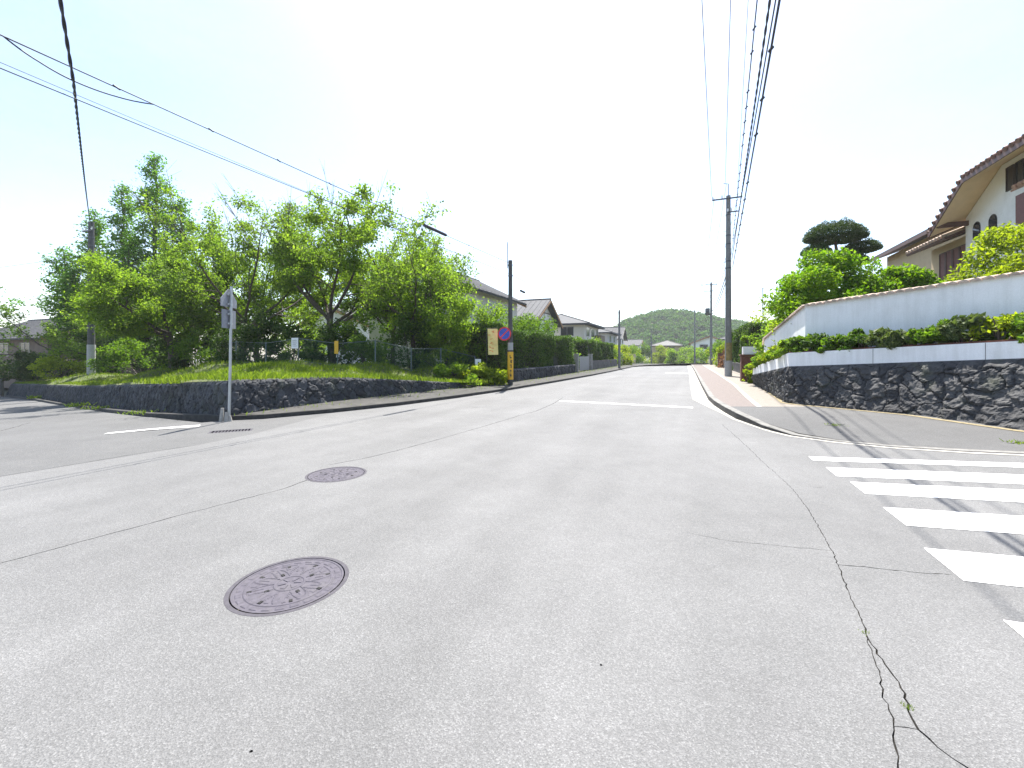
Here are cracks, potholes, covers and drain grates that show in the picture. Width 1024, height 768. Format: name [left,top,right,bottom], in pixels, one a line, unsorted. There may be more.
manhole cover [223,556,349,617]
crack [706,481,968,768]
manhole cover [305,466,367,483]
